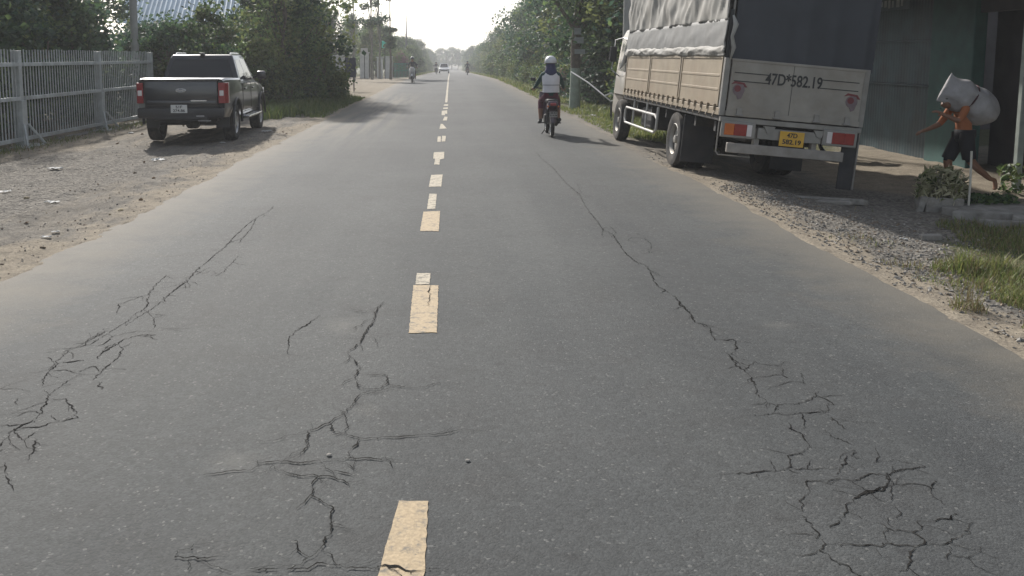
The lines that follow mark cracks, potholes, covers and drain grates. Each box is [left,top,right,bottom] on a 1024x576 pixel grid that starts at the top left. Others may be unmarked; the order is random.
crack [175,302,462,576]
crack [539,155,996,576]
crack [0,207,276,490]
